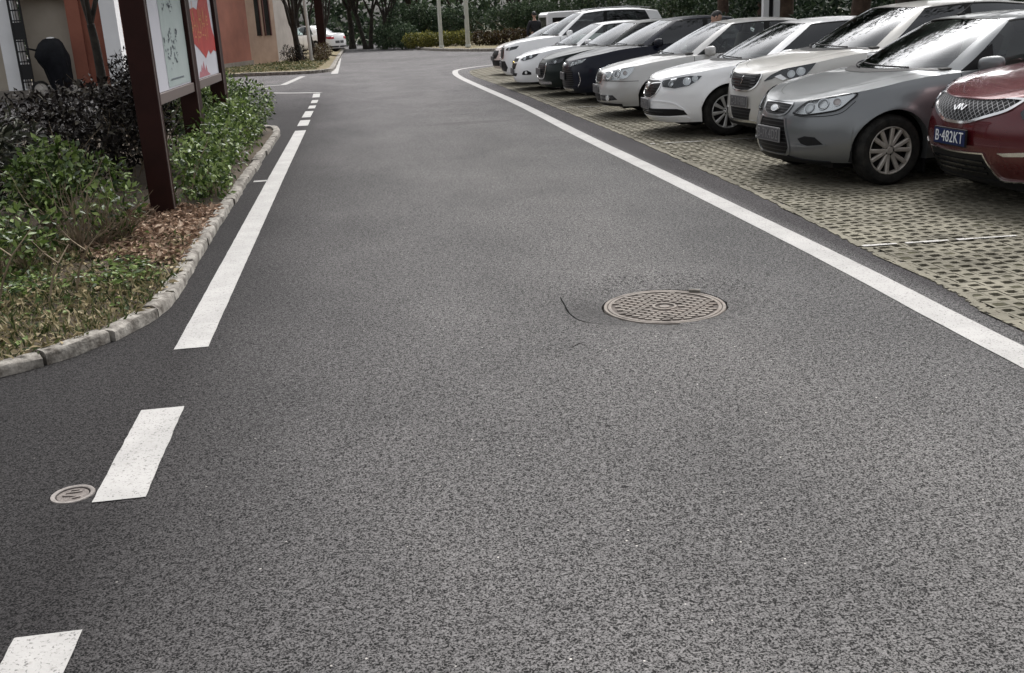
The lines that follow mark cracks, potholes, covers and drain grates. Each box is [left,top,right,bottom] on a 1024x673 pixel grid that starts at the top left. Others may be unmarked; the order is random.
utility cover [50,484,96,504]
manhole cover [604,289,726,325]
crack [560,297,612,325]
